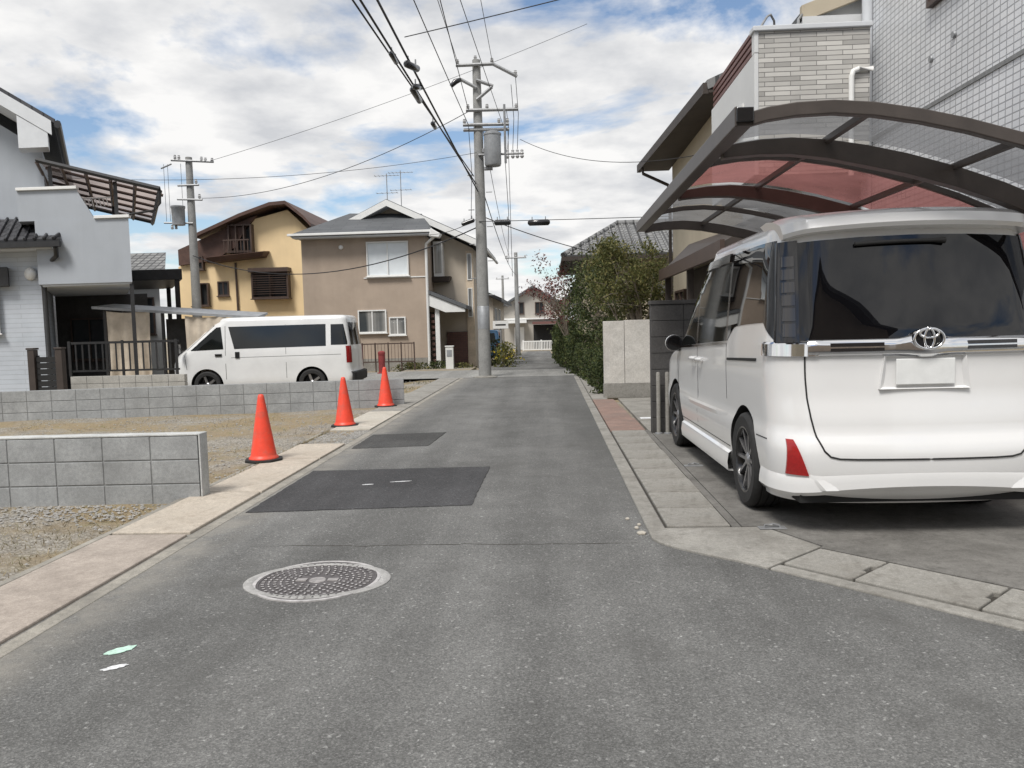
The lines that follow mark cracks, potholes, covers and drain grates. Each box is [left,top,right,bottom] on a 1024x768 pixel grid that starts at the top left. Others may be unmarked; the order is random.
manhole cover [243,561,391,603]
